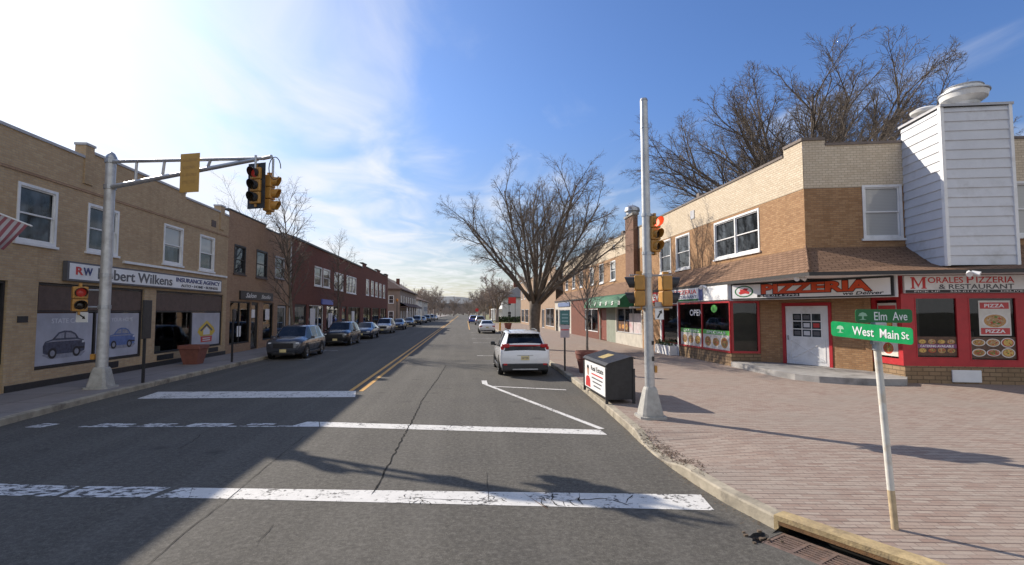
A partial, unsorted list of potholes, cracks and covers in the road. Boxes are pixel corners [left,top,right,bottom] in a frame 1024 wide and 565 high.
drain grate [761,511,948,565]
crack [373,365,507,504]
